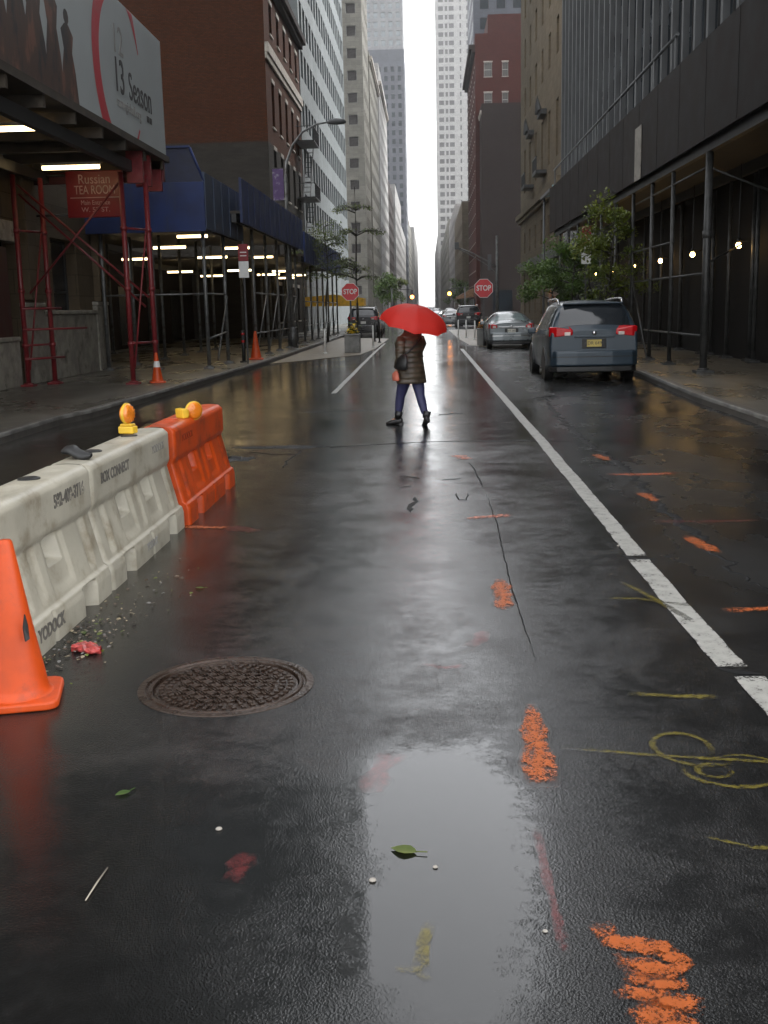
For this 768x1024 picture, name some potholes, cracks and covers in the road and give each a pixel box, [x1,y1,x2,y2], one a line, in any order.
manhole cover [137,657,314,717]
crack [443,463,535,657]
